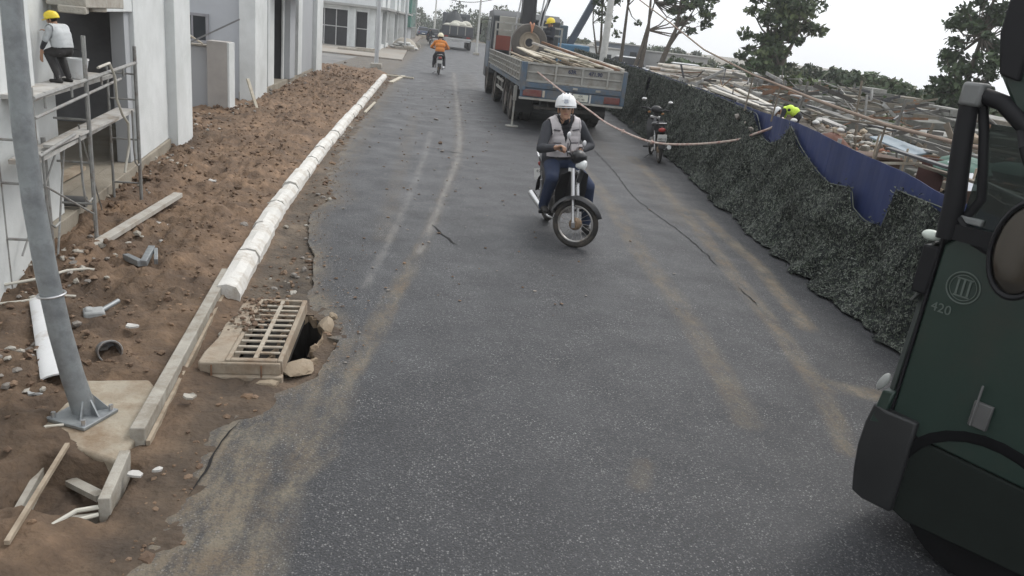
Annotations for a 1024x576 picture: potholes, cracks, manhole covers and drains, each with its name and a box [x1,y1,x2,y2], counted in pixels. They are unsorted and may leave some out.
drain grate [198,299,307,383]
crack [183,422,239,496]
pothole [268,315,323,375]
